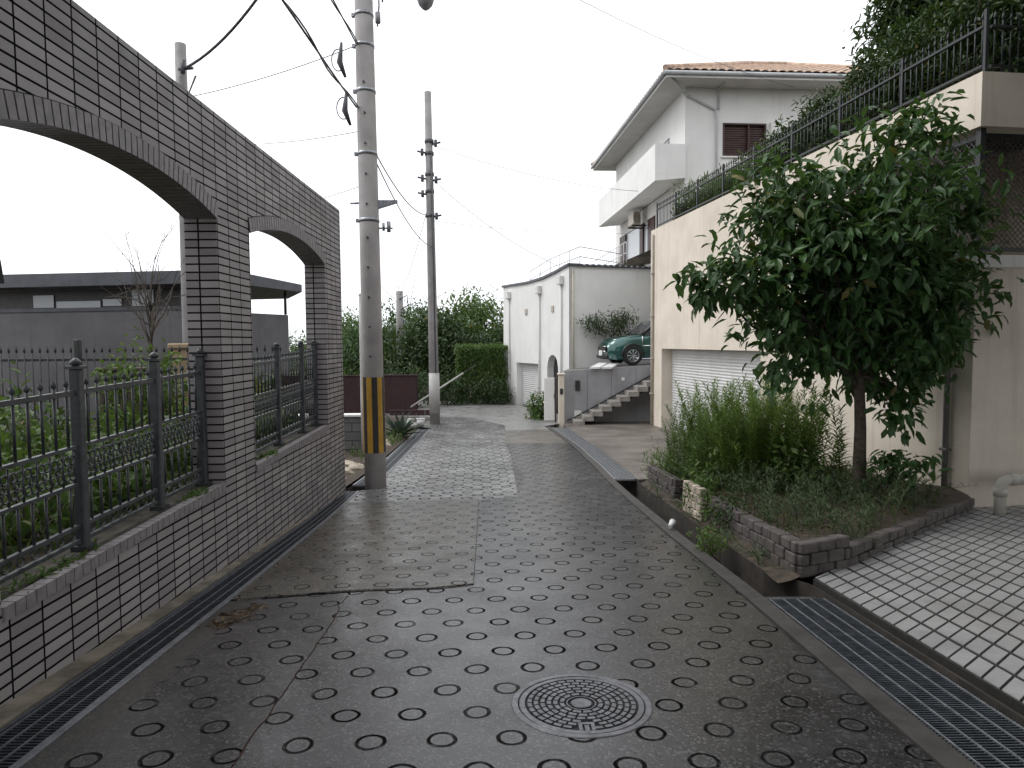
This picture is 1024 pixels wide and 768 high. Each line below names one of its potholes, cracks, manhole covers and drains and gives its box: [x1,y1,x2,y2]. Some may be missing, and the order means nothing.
drain grate [552,427,637,481]
drain grate [767,598,1024,768]
drain grate [0,600,230,768]
drain grate [190,491,359,601]
manhole cover [511,674,653,739]
